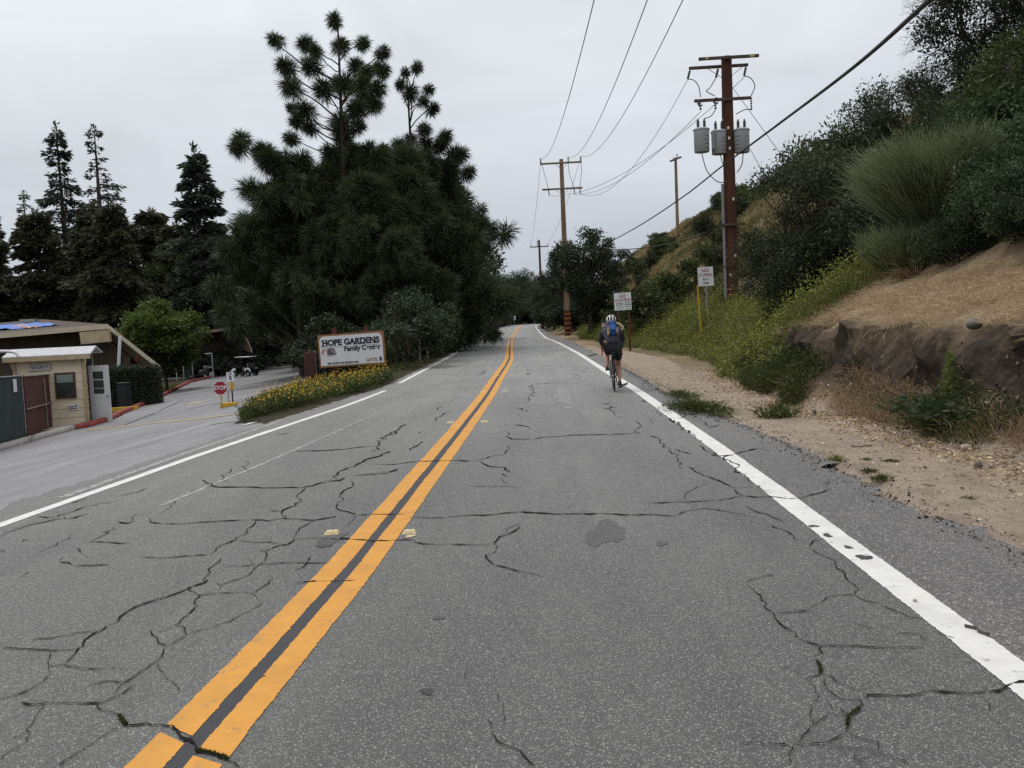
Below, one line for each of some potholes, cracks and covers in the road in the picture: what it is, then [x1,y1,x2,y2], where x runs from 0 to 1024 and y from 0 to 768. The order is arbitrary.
crack [0,369,1024,766]
